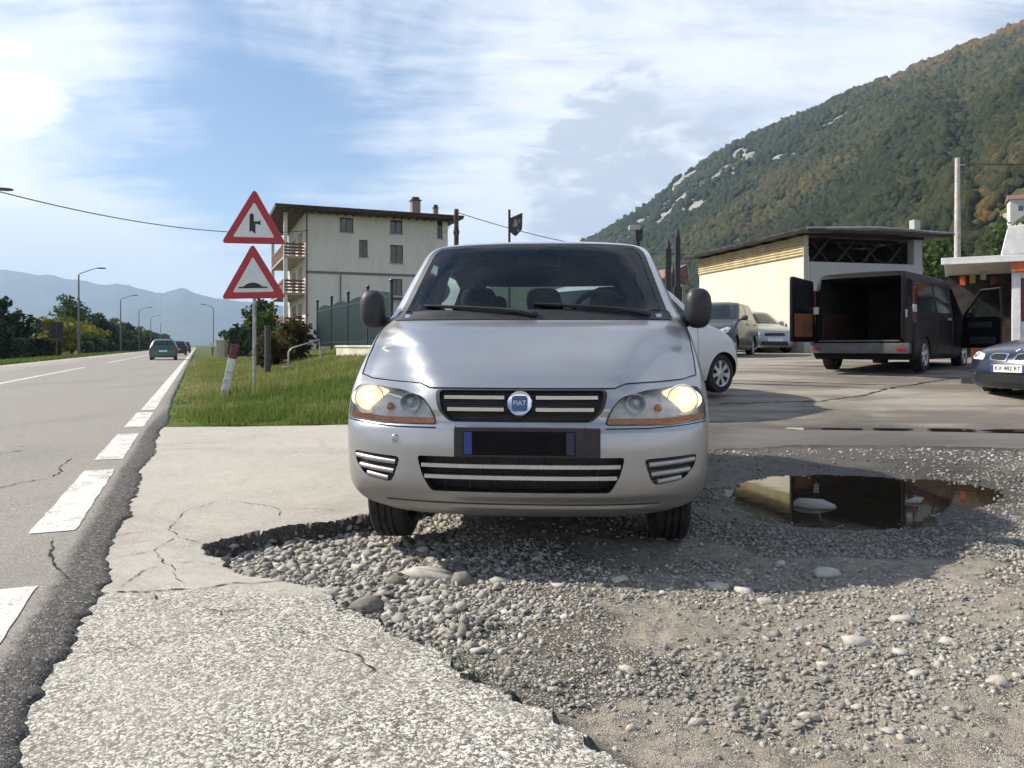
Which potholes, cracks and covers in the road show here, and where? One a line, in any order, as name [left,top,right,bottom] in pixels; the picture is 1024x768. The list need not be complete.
crack [104,502,343,599]
crack [48,540,69,580]
crack [330,646,376,680]
pothole [693,466,1024,539]
